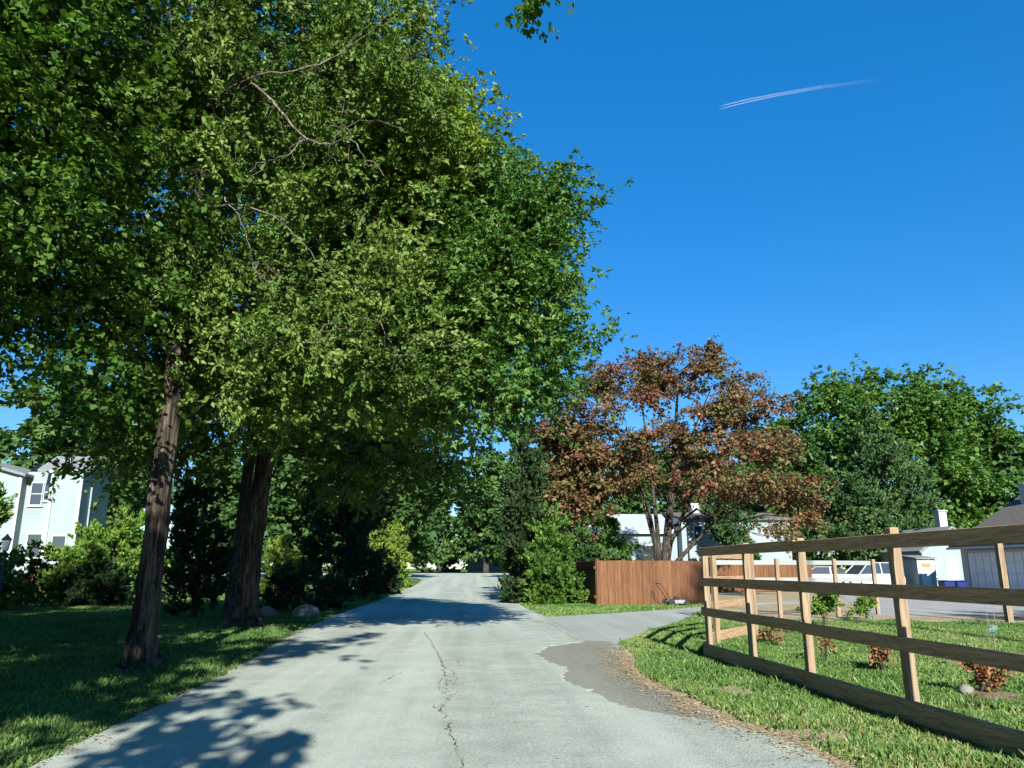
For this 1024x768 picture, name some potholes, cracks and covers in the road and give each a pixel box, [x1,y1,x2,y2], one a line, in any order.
crack [424,632,464,765]
